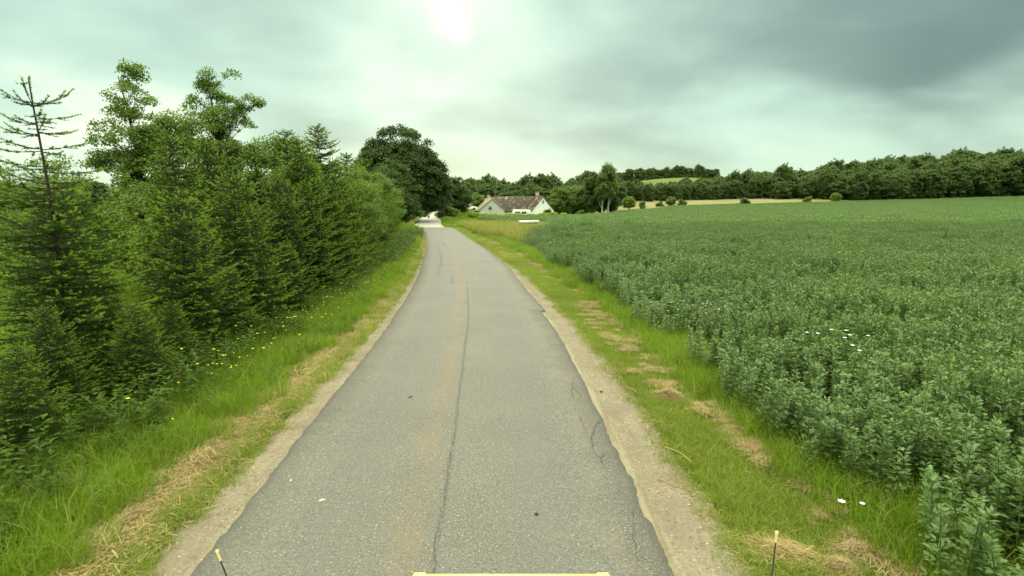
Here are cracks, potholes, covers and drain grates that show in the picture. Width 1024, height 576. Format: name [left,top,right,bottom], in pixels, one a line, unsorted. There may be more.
crack [431,241,470,574]
